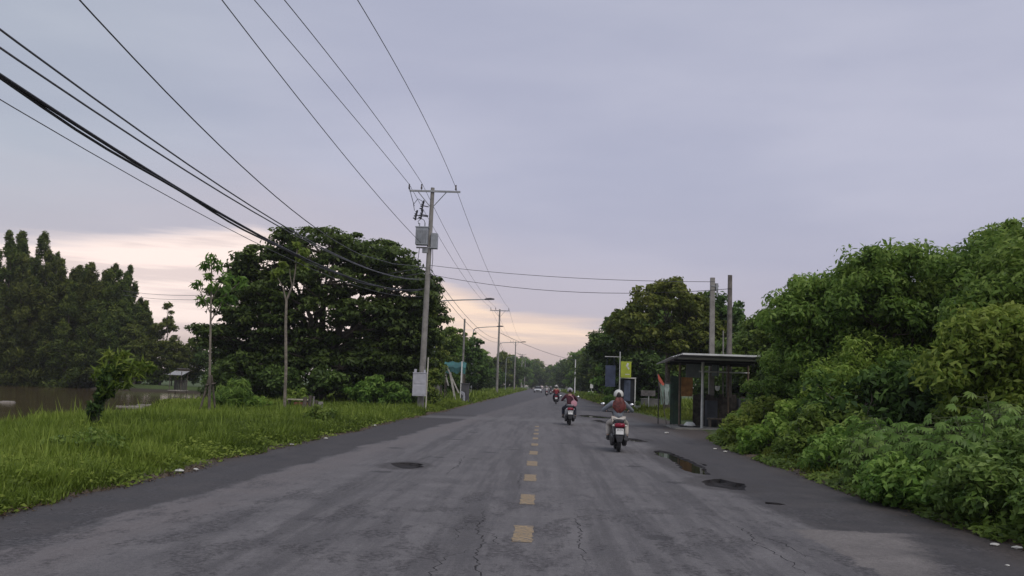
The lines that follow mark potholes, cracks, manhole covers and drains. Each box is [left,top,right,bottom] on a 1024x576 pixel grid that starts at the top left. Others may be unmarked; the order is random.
pothole [654,450,711,475]
crack [428,510,530,576]
crack [728,521,806,575]
pothole [702,479,747,490]
